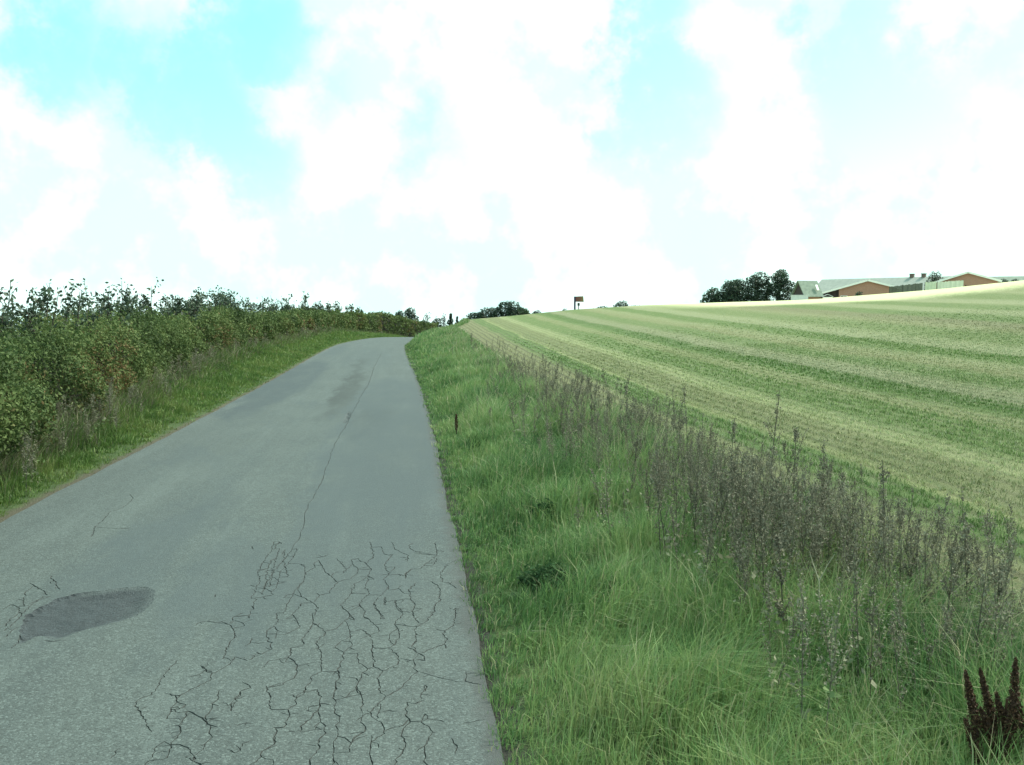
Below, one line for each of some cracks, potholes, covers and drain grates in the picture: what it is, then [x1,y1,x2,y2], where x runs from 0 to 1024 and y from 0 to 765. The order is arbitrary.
crack [288,358,379,548]
crack [134,542,486,765]
crack [3,576,60,649]
